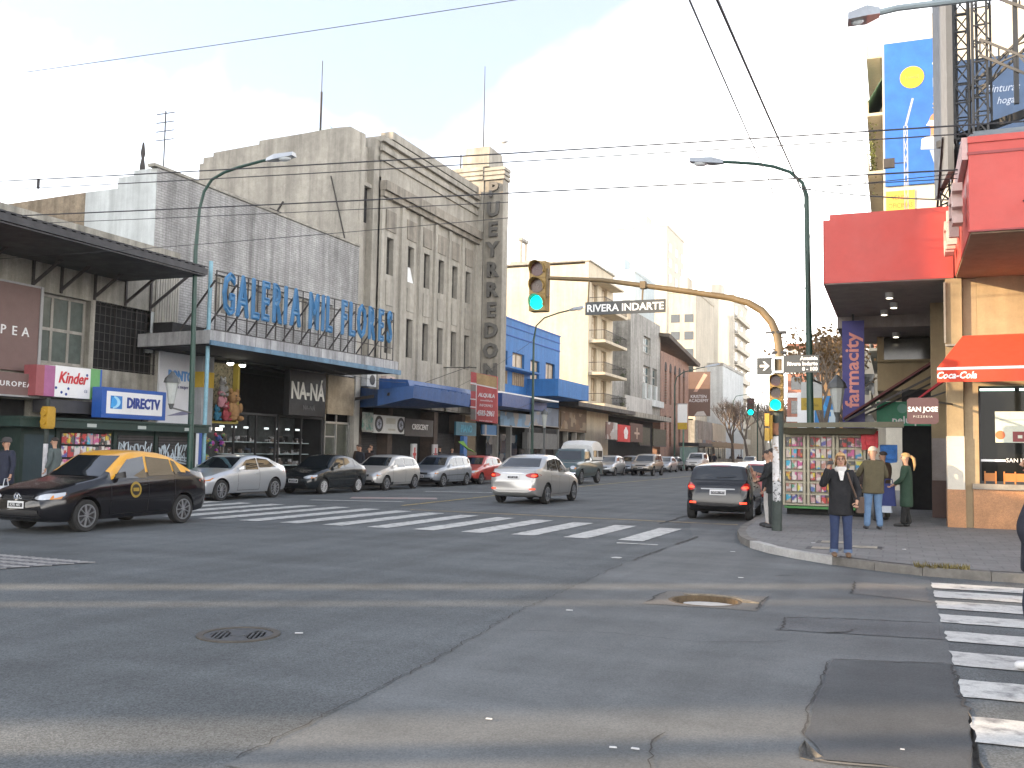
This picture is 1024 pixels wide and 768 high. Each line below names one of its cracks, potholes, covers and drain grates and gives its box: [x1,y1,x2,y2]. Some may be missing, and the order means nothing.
crack [647,732,665,768]
manhole cover [196,626,281,643]
manhole cover [668,593,759,606]
